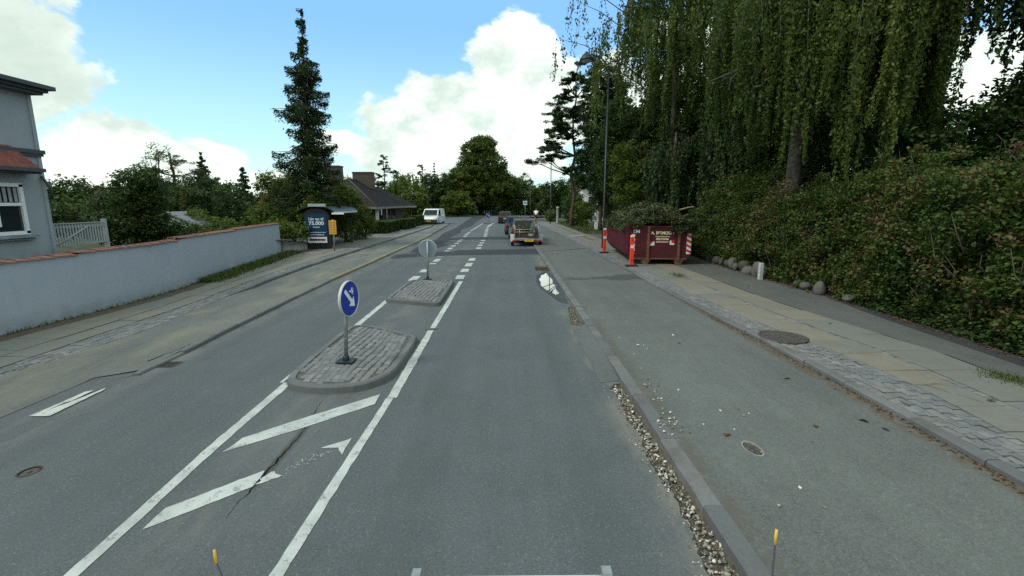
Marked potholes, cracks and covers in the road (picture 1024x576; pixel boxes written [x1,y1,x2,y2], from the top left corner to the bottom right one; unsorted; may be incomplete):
utility cover [15,466,43,478]
pothole [536,271,569,304]
manhole cover [758,330,809,344]
utility cover [741,440,764,457]
crack [226,400,323,518]
